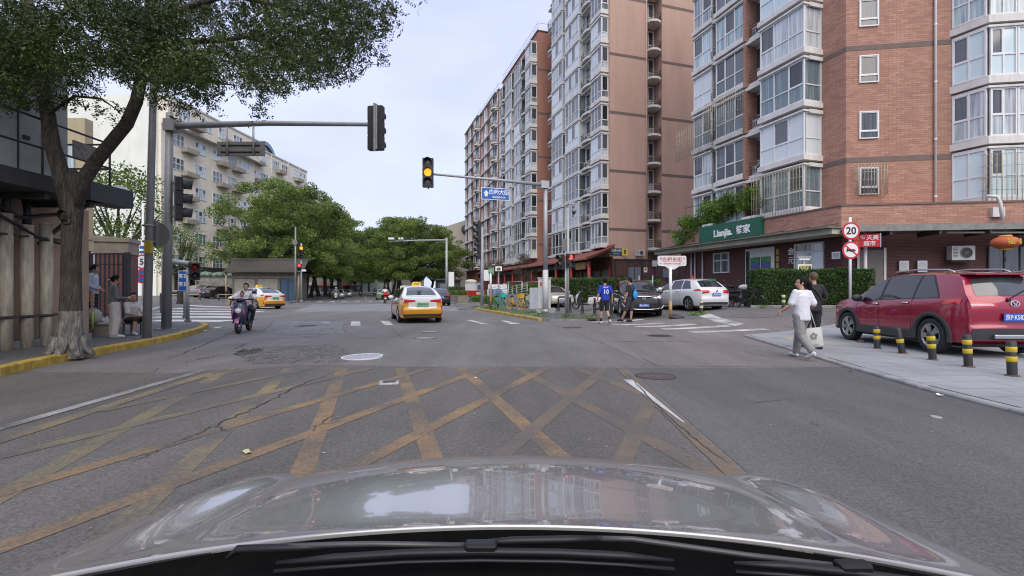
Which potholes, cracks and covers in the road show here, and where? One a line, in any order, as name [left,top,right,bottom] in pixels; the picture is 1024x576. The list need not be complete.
manhole cover [635,372,676,380]
crack [133,315,400,461]
